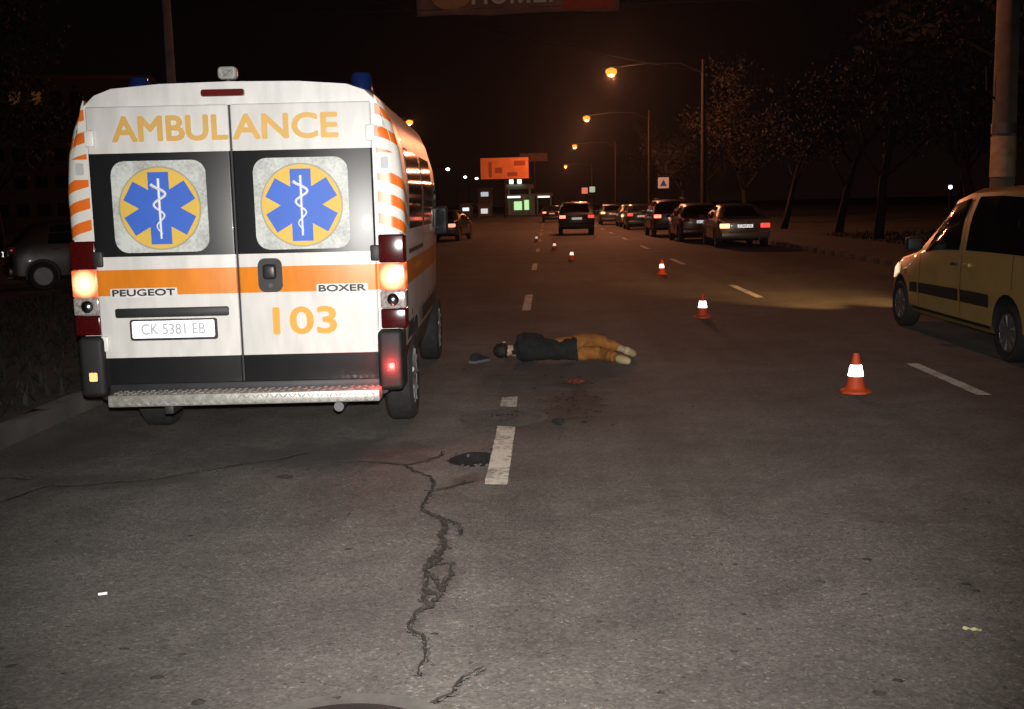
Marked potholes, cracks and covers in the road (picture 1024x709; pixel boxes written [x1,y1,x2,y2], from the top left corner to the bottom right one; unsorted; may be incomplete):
crack [0,452,307,502]
manhole cover [460,409,548,427]
crack [342,451,484,703]
pothole [447,452,492,468]
